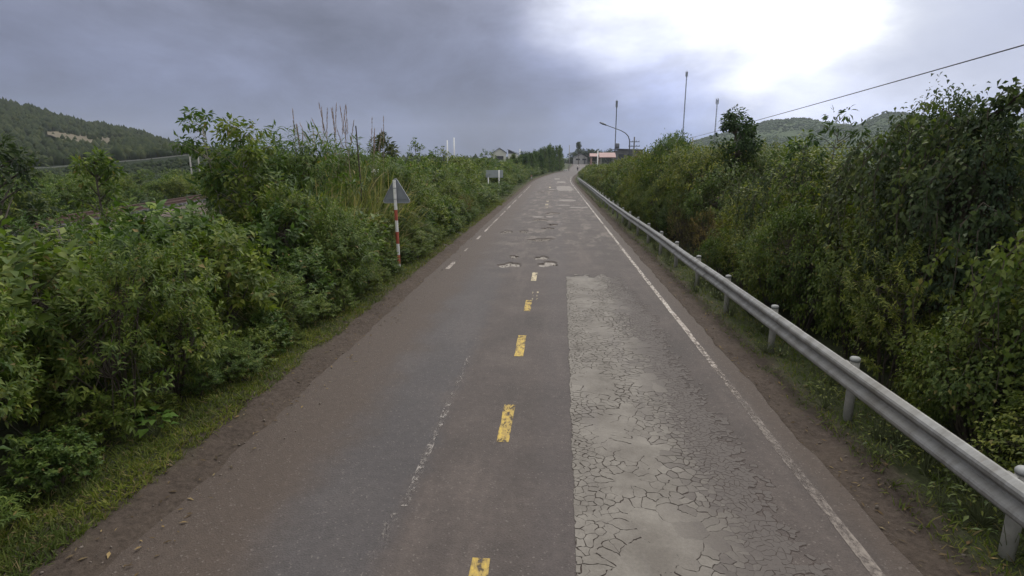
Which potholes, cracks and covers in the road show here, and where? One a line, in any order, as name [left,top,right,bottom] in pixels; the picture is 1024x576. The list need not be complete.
crack [566,275,831,576]
